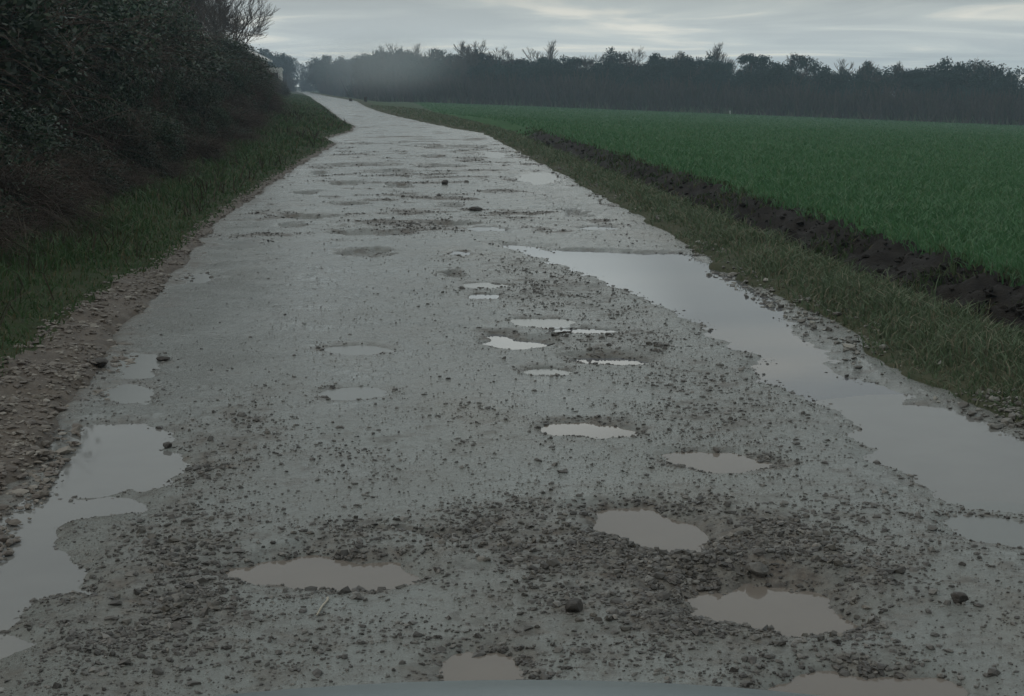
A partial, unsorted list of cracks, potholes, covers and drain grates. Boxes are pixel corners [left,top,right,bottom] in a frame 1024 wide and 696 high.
pothole [633,553,891,643]
pothole [555,349,668,366]
pothole [188,535,451,599]
pothole [643,443,803,477]
pothole [309,340,406,357]
pothole [321,245,410,260]
pothole [405,633,560,682]
pothole [521,415,655,440]
pothole [510,362,590,376]
pothole [499,314,586,329]
pothole [304,382,402,402]
pothole [471,327,568,350]
